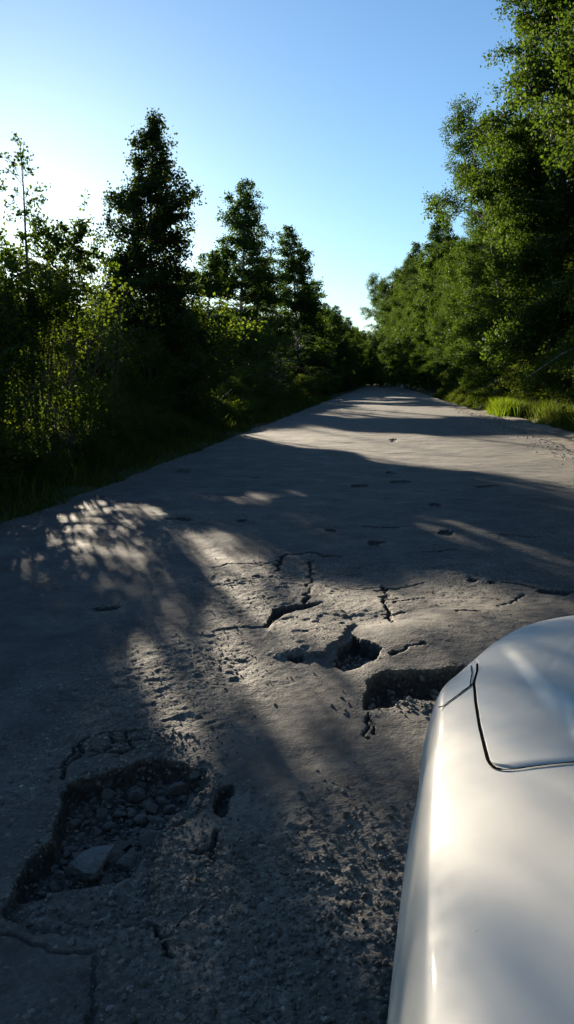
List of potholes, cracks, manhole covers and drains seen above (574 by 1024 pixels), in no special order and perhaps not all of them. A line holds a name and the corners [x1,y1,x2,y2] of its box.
pothole [284,653,307,664]
pothole [362,665,465,710]
pothole [331,634,384,670]
pothole [0,757,219,940]
crack [346,582,429,622]
crack [215,552,342,604]
crack [0,930,101,1024]
crack [454,581,537,612]
pothole [211,783,237,818]
